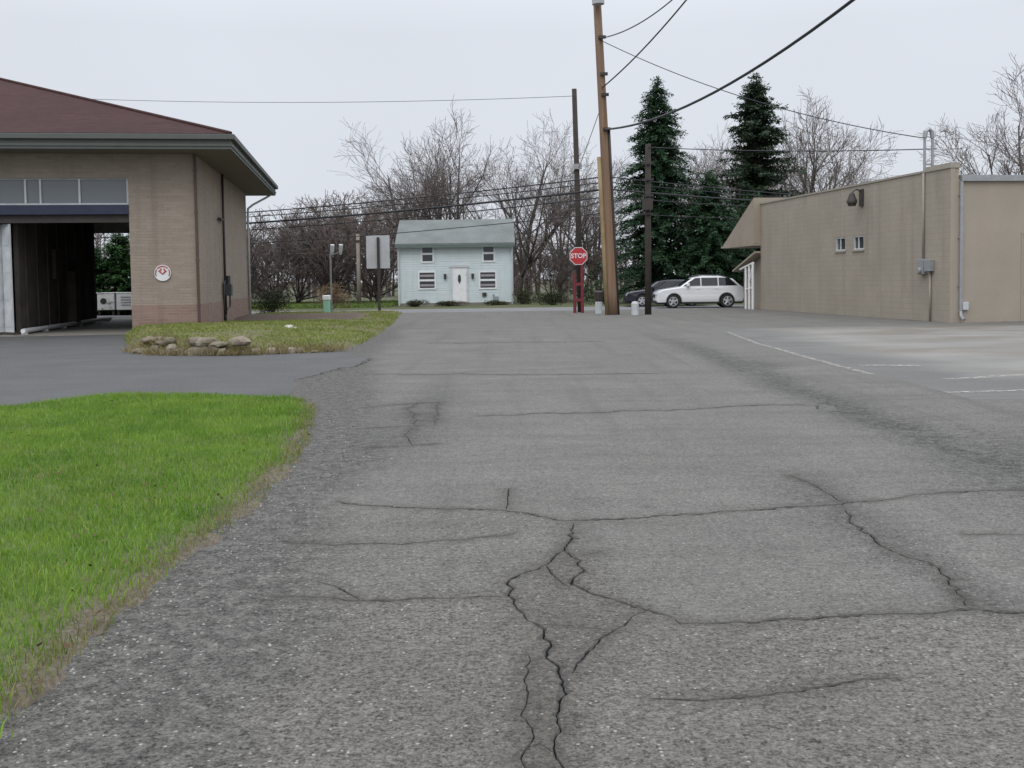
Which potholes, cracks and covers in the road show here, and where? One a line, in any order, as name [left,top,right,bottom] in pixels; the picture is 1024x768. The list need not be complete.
crack [369,402,439,448]
crack [275,476,1024,768]
crack [488,405,759,416]
